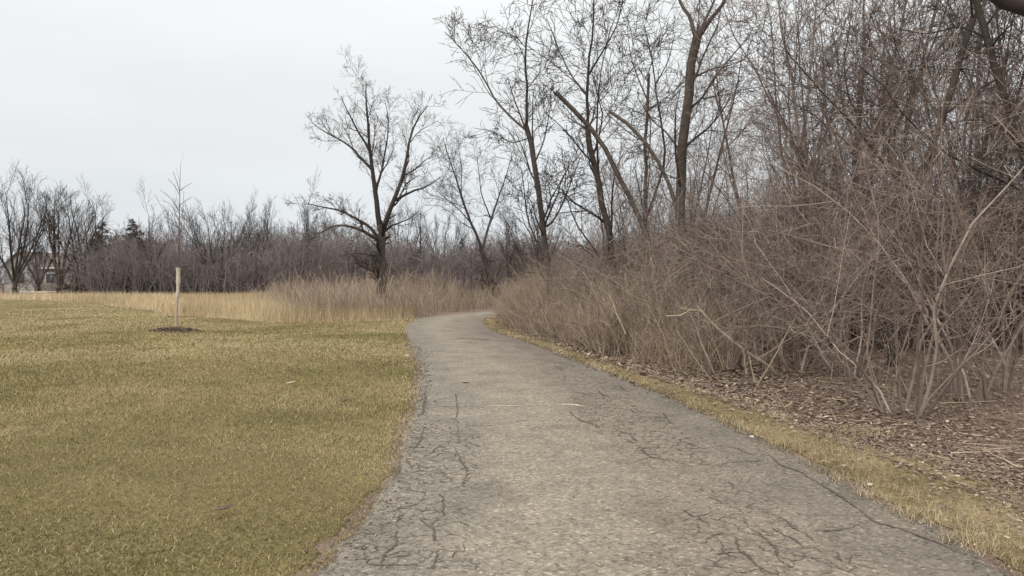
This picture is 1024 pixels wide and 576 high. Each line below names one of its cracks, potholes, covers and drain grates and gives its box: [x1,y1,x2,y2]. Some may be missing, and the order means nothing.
crack [538,358,957,575]
crack [361,391,531,572]
